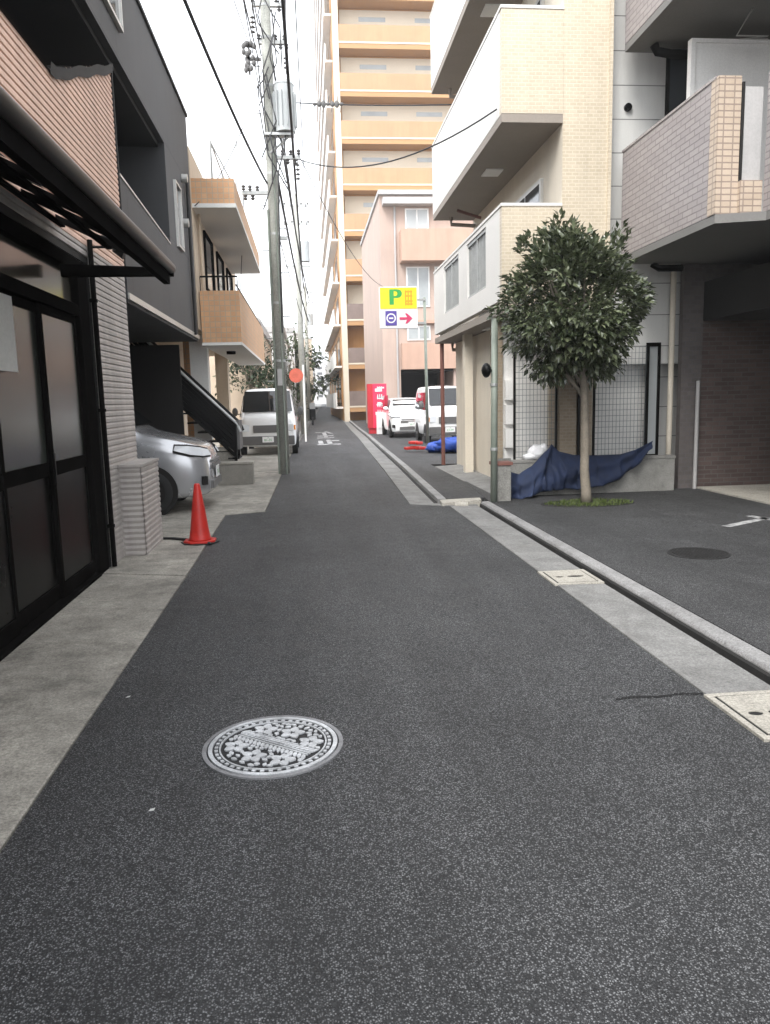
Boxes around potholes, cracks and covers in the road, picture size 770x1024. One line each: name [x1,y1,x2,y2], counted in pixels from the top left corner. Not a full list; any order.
manhole cover [202,715,343,780]
crack [615,692,703,700]
